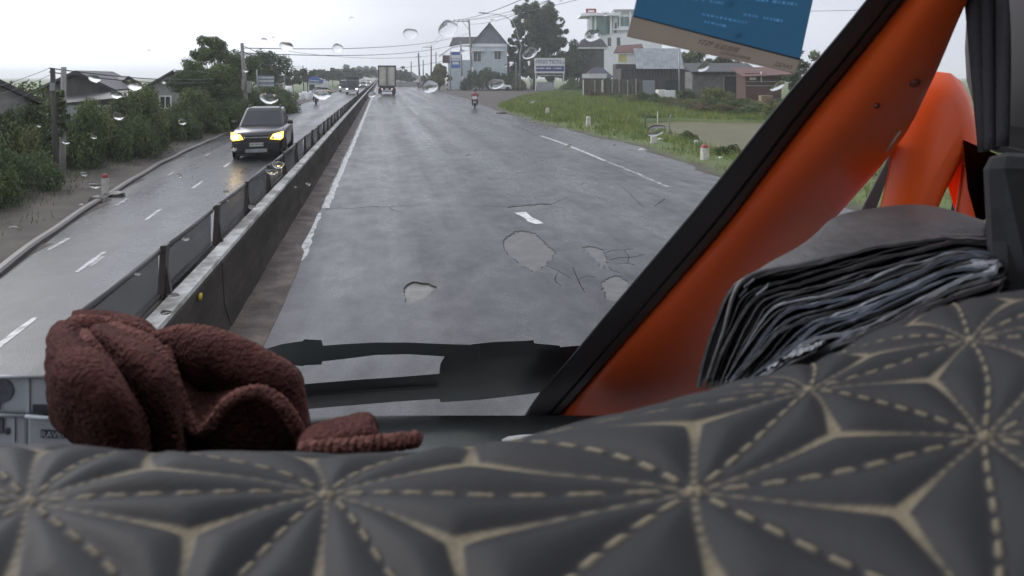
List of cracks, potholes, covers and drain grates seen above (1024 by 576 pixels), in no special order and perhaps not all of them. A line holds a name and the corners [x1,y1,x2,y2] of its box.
pothole [403,281,437,303]
pothole [582,246,609,269]
pothole [503,230,557,273]
pothole [600,275,629,301]
crack [548,249,645,293]
